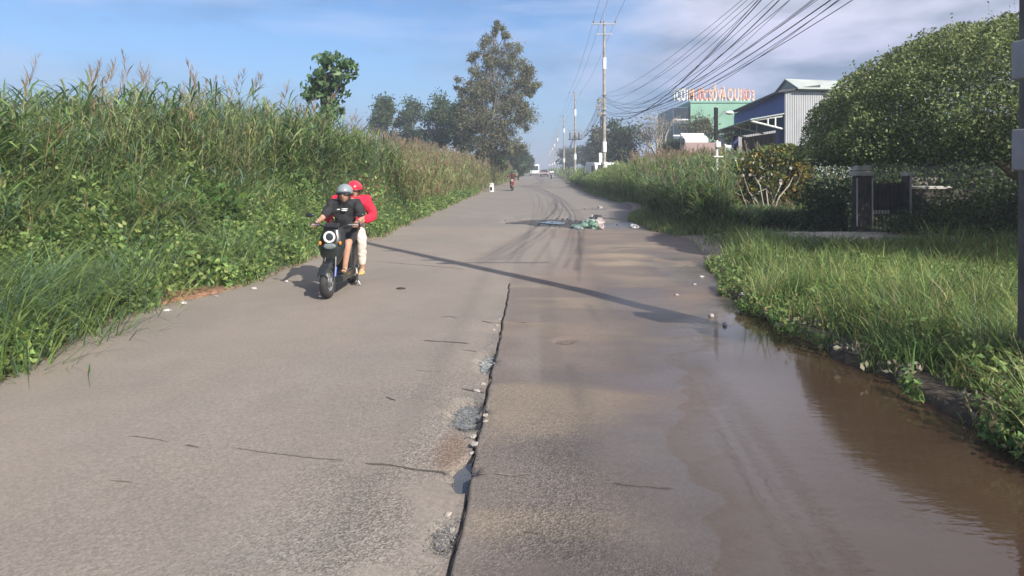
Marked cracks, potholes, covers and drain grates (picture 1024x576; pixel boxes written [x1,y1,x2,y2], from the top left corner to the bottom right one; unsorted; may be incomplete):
crack [425,283,529,576]
crack [367,463,450,475]
pothole [477,355,497,373]
pothole [423,520,461,556]
pothole [440,402,489,432]
pothole [452,461,476,494]
crack [233,447,341,460]
